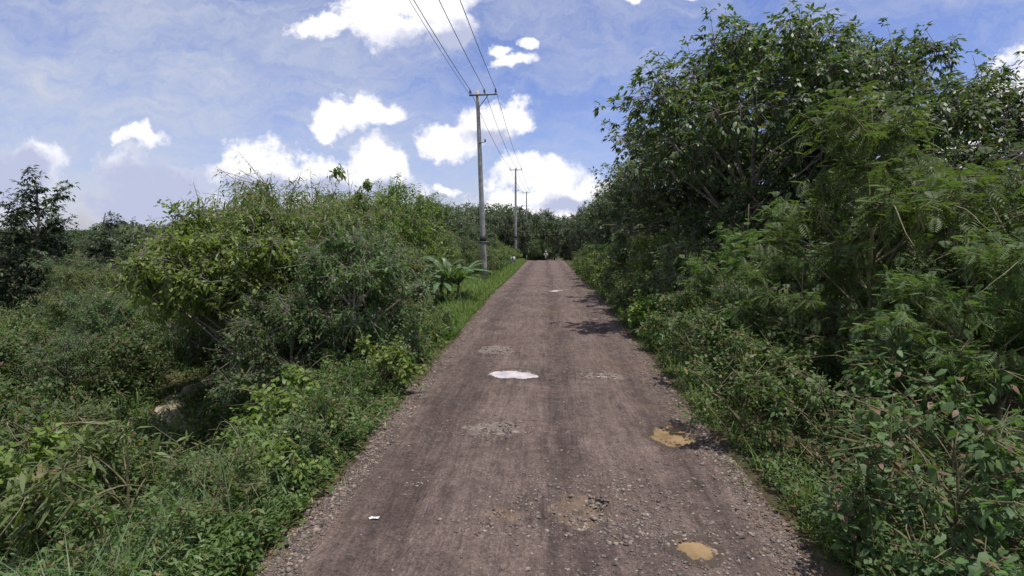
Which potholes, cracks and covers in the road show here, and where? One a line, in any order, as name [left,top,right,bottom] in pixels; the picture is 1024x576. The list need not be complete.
pothole [472,344,521,356]
pothole [455,419,528,439]
pothole [663,534,731,570]
pothole [641,420,708,449]
pothole [474,503,532,528]
pothole [573,371,633,382]
pothole [538,489,622,537]
